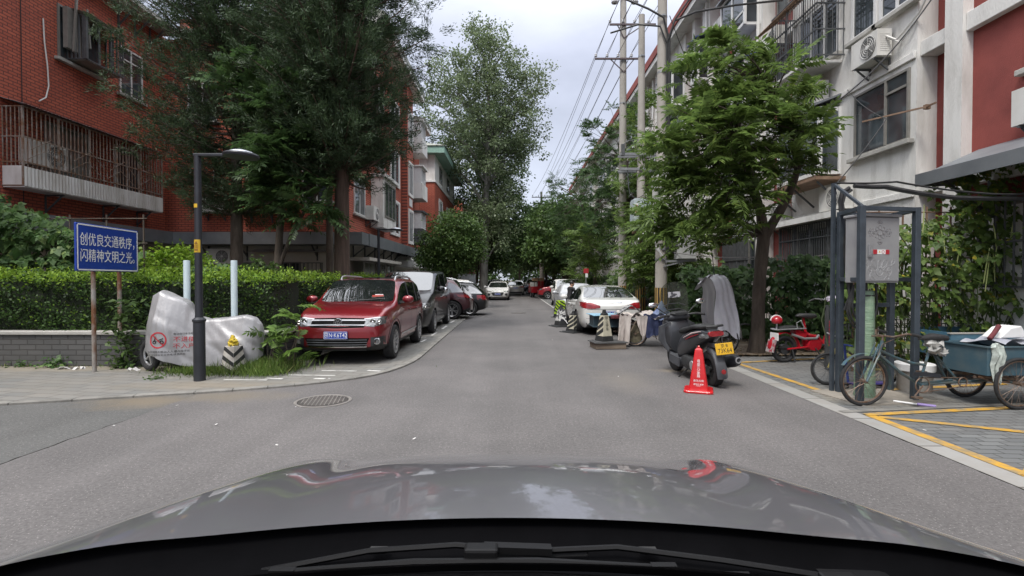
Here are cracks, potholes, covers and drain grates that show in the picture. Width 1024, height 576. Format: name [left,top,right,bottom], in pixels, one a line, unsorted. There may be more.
crack [0,421,123,465]
manhole cover [293,394,352,408]
